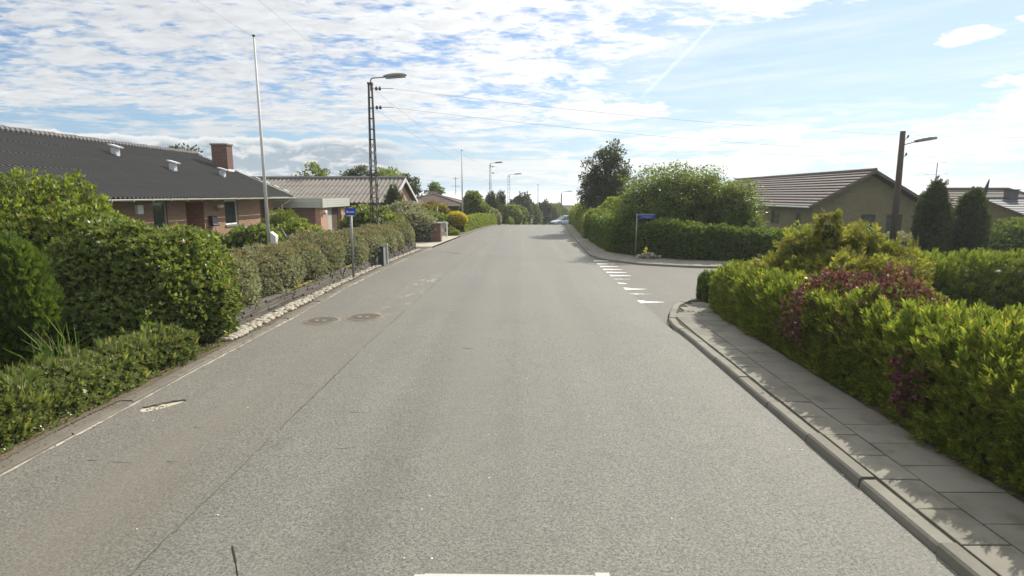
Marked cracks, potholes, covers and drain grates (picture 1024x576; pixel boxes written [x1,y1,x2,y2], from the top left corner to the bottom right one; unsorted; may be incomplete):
manhole cover [300,317,342,325]
manhole cover [344,313,385,321]
